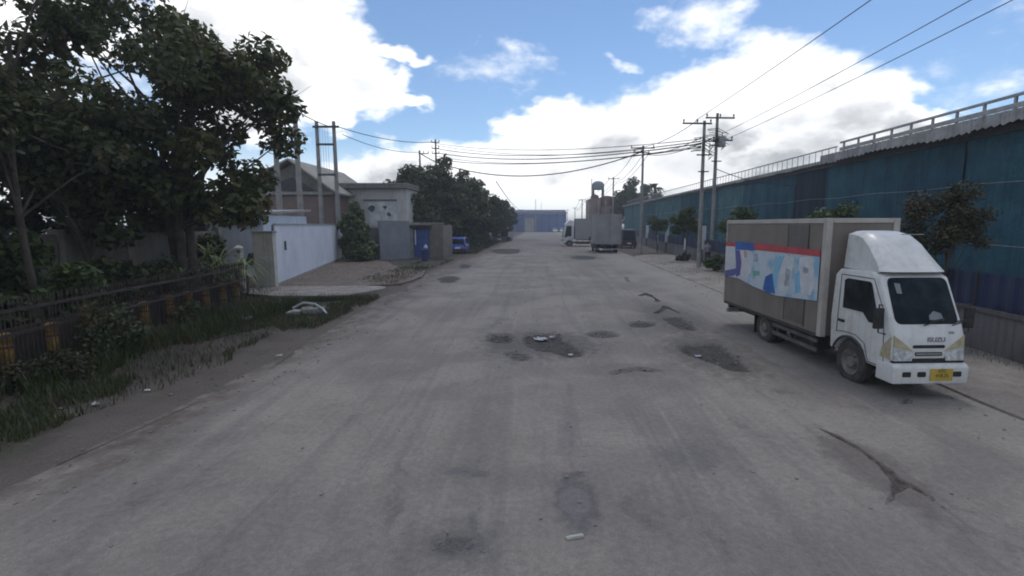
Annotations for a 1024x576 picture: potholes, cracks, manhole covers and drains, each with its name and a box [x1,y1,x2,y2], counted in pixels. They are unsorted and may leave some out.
crack [816,427,978,535]
pothole [583,330,620,339]
pothole [659,316,701,331]
crack [638,293,680,314]
pothole [518,332,586,358]
pothole [626,320,658,328]
pothole [606,366,665,375]
pothole [674,342,755,372]
pothole [485,333,517,343]
pothole [502,350,535,361]
